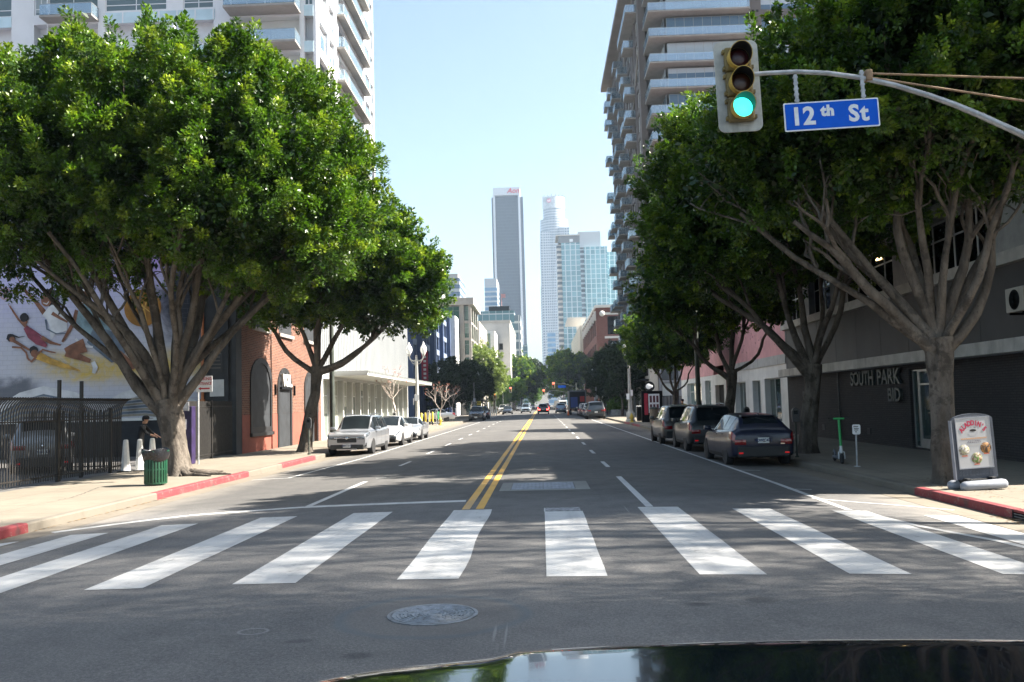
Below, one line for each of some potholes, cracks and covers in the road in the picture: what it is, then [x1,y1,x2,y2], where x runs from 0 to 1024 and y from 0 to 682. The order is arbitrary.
drain grate [1012,509,1024,519]
manhole cover [387,604,478,626]
